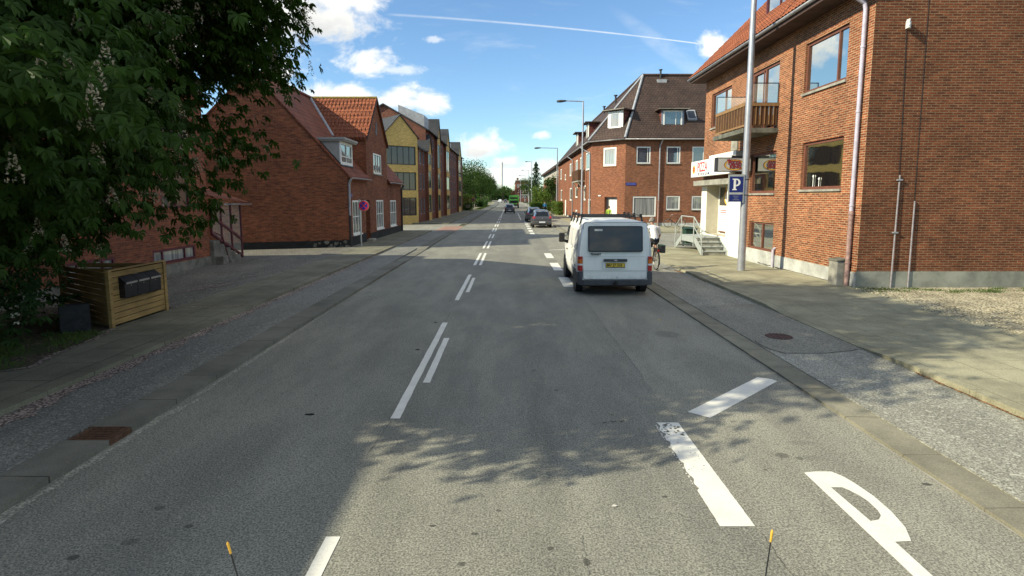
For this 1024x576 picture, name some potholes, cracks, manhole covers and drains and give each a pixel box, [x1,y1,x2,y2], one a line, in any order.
drain grate [68,427,132,446]
